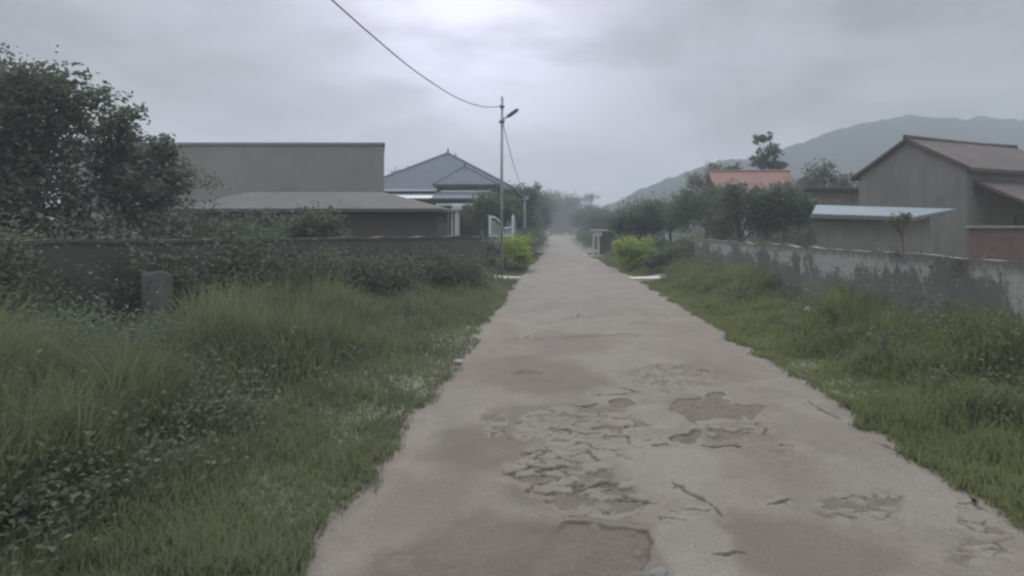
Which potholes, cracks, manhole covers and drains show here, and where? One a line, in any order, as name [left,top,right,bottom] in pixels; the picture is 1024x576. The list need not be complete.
pothole [655,390,773,426]
pothole [440,516,663,576]
pothole [661,424,709,446]
crack [468,361,1024,576]
